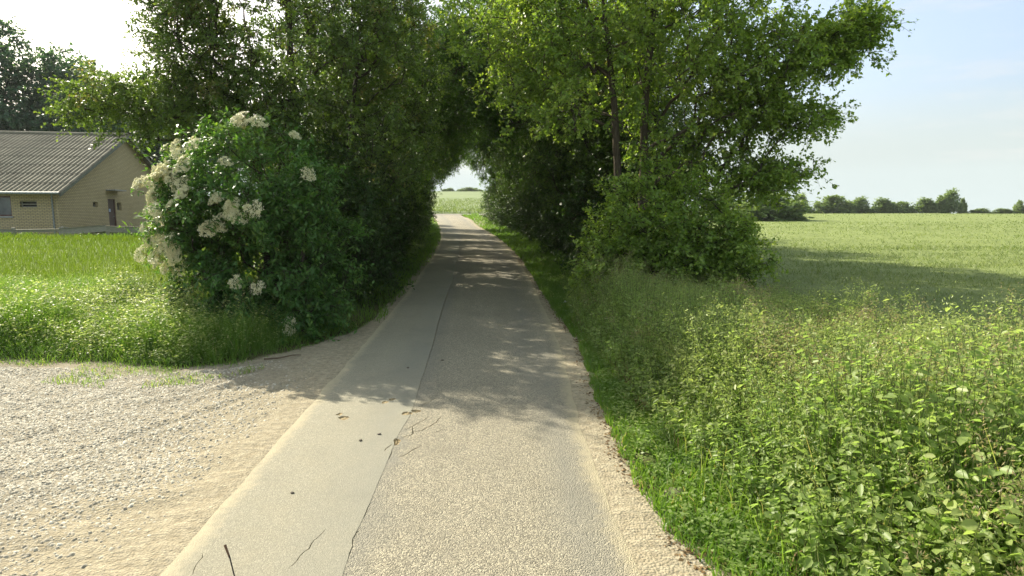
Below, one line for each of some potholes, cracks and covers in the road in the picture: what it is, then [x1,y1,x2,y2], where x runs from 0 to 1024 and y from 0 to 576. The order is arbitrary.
crack [385,398,441,456]
